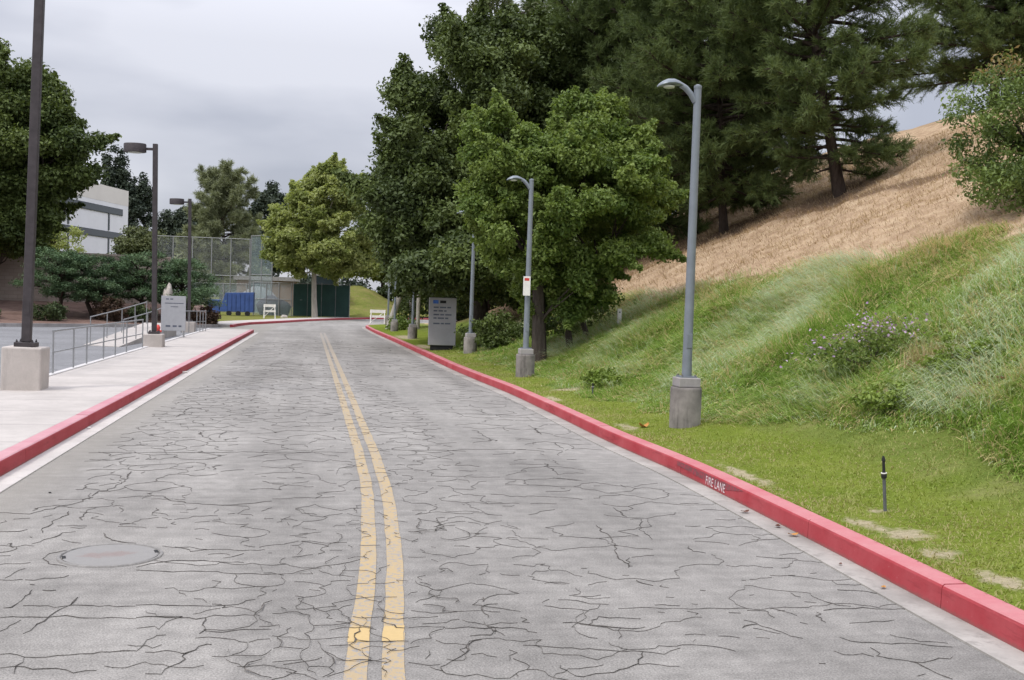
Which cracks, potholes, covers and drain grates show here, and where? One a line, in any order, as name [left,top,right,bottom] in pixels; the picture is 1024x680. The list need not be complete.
manhole cover [56,543,164,568]
crack [0,339,953,680]
